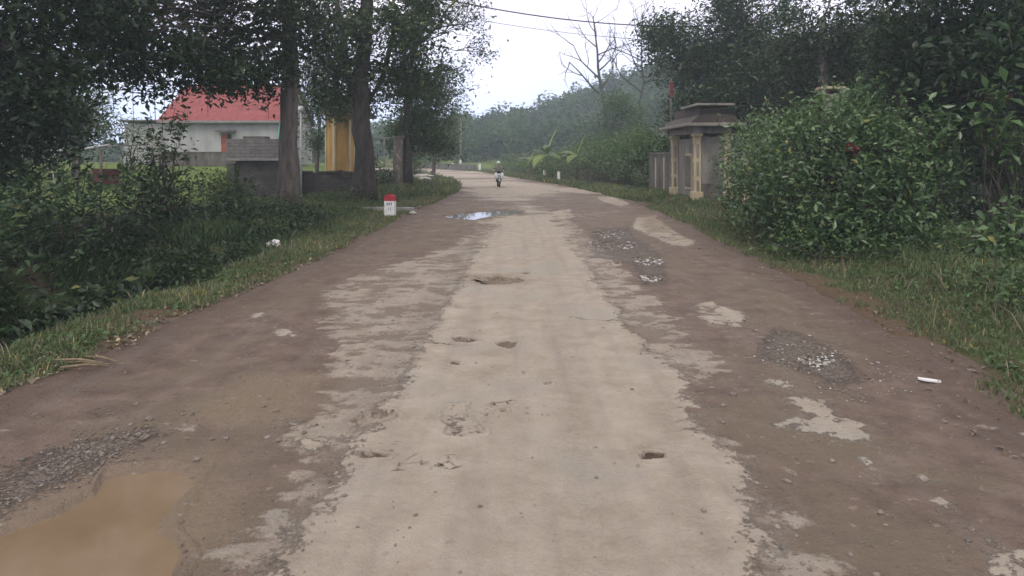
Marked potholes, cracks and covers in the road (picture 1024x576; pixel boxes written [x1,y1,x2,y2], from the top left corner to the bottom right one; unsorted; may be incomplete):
pothole [630,447,674,464]
pothole [446,334,483,345]
pothole [464,273,536,286]
pothole [584,229,633,239]
pothole [490,338,522,351]
pothole [584,239,643,251]
pothole [0,456,214,576]
pothole [628,254,671,267]
pothole [431,401,492,440]
pothole [634,274,669,284]
pothole [434,209,531,221]
pothole [792,353,842,370]
